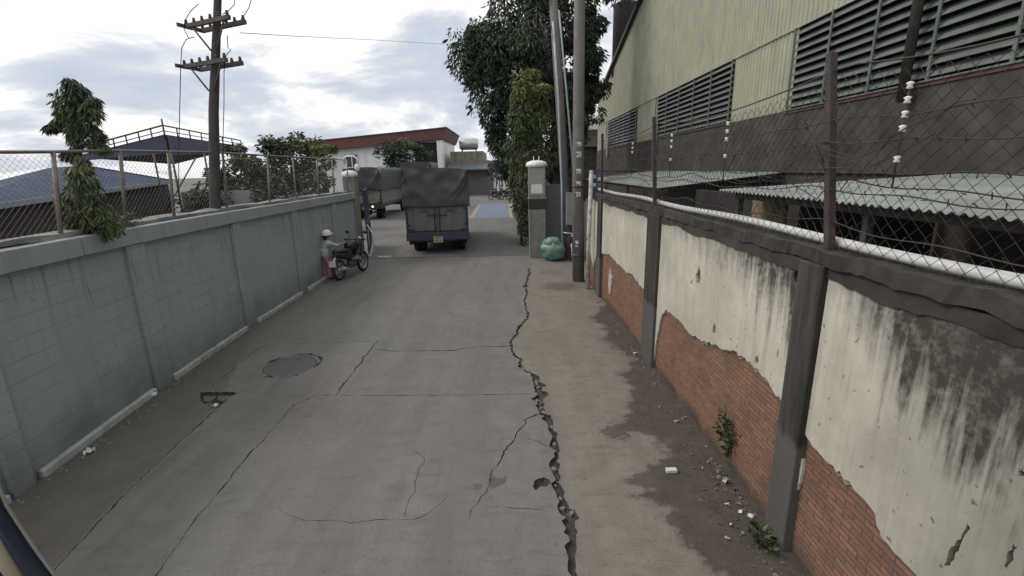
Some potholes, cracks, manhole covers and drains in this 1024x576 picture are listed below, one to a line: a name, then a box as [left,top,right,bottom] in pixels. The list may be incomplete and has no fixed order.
crack [155,267,579,576]
manhole cover [259,353,323,378]
pothole [199,391,238,409]
